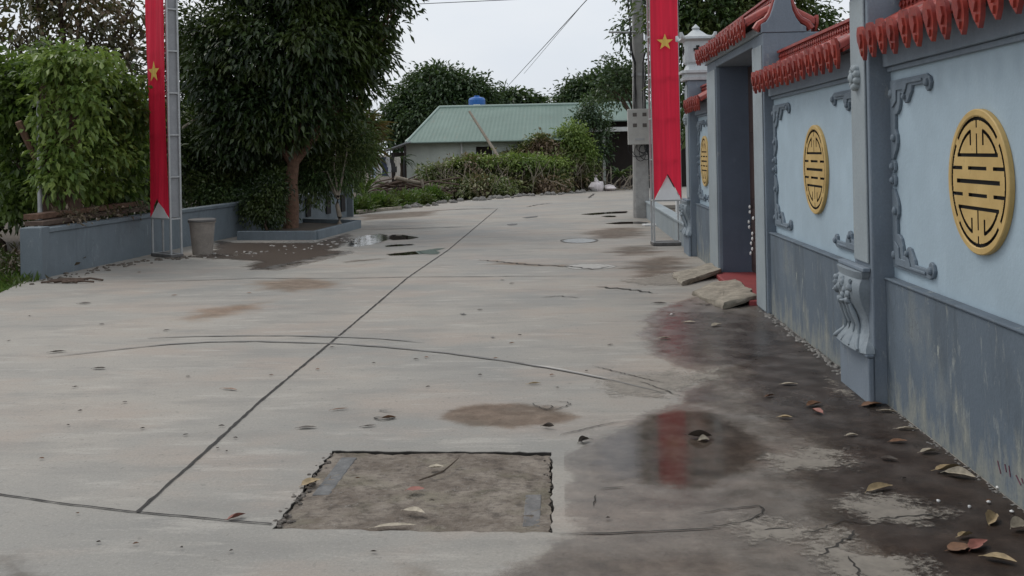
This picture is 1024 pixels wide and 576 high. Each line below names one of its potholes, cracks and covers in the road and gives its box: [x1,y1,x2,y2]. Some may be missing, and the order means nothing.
crack [700,505,940,576]
